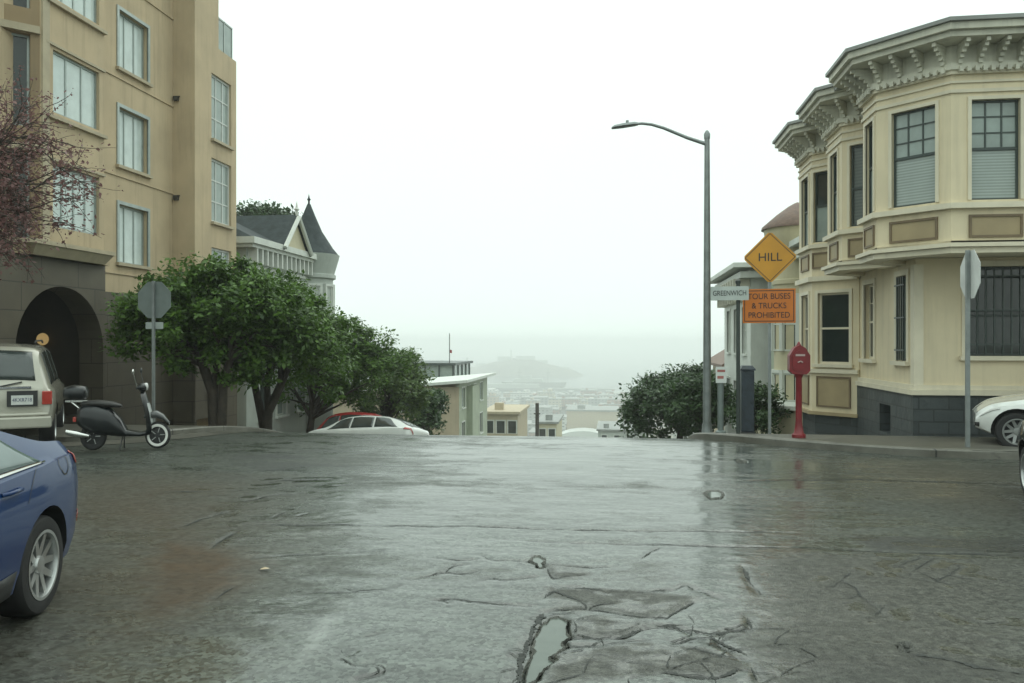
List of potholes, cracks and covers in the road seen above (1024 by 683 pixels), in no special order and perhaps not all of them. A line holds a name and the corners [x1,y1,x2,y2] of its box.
crack [833,573,883,615]
crack [418,556,817,683]
pothole [525,616,571,683]
pothole [704,490,725,499]
pothole [528,555,546,568]
